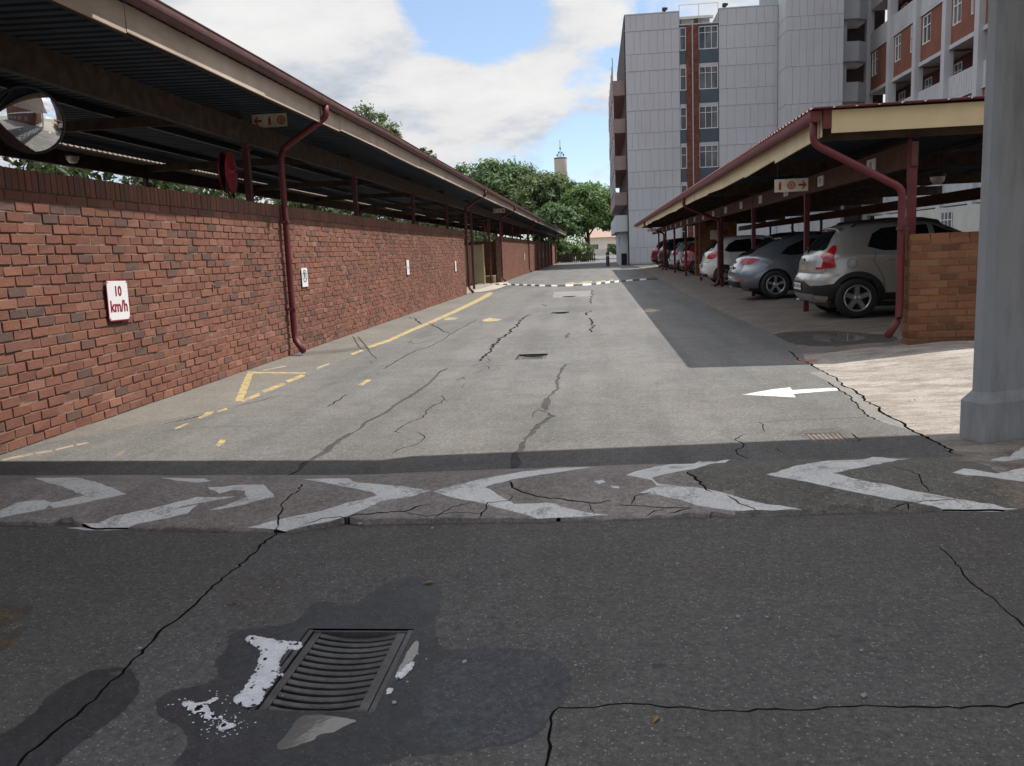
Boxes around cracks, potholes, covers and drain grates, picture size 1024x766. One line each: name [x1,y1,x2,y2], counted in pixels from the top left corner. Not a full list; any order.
drain grate [249,629,413,712]
crack [17,304,757,766]
crack [938,546,1024,627]
crack [545,702,1024,766]
crack [735,351,964,510]
